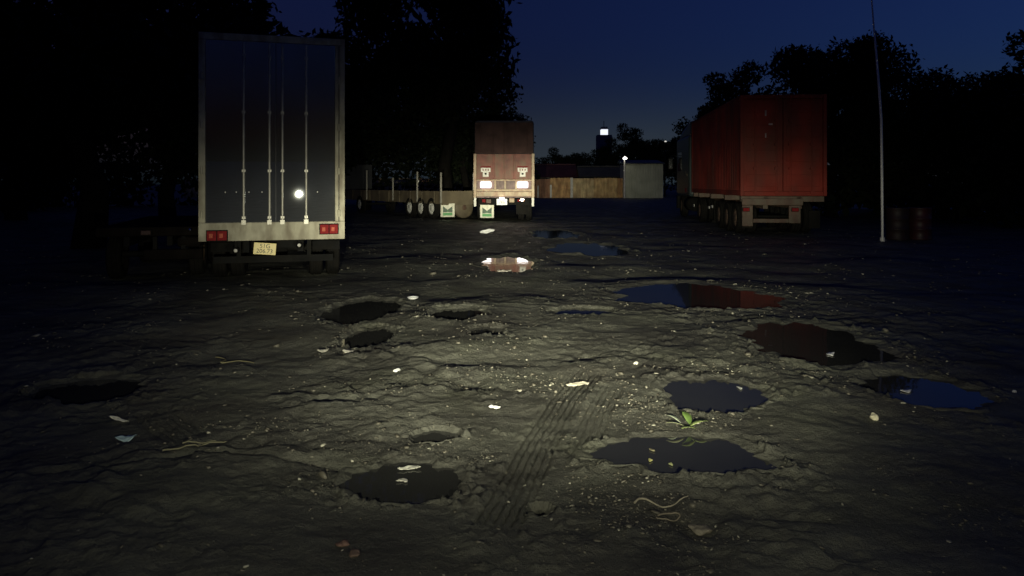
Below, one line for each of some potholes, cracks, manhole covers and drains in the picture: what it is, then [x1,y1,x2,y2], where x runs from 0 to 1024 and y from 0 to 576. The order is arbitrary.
pothole [537,241,642,258]
pothole [597,279,803,312]
pothole [650,375,779,415]
pothole [338,325,396,351]
pothole [427,305,491,322]
pothole [471,252,542,273]
pothole [572,431,783,476]
pothole [732,317,911,380]
pothole [312,295,405,328]
pothole [524,228,587,240]
pothole [401,424,463,445]
pothole [332,454,472,507]
